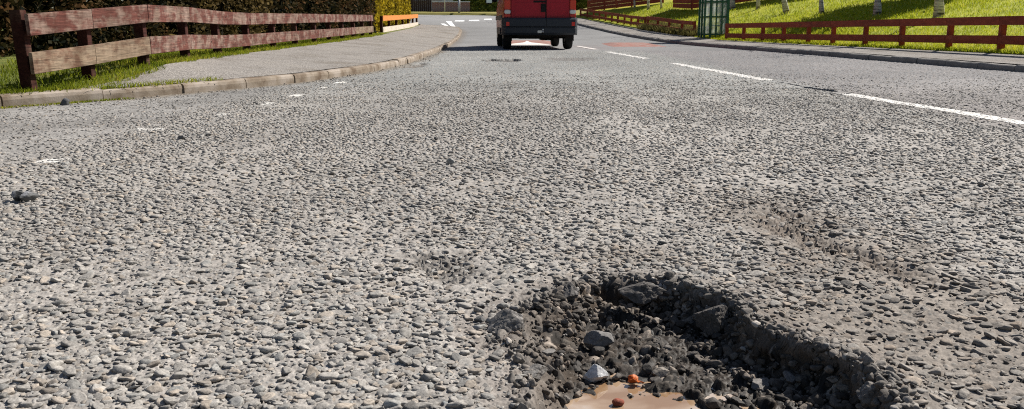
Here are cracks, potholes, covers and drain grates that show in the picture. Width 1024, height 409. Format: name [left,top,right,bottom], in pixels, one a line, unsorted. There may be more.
pothole [742,202,956,295]
pothole [491,276,904,409]
pothole [384,249,517,291]
crack [772,80,849,94]
